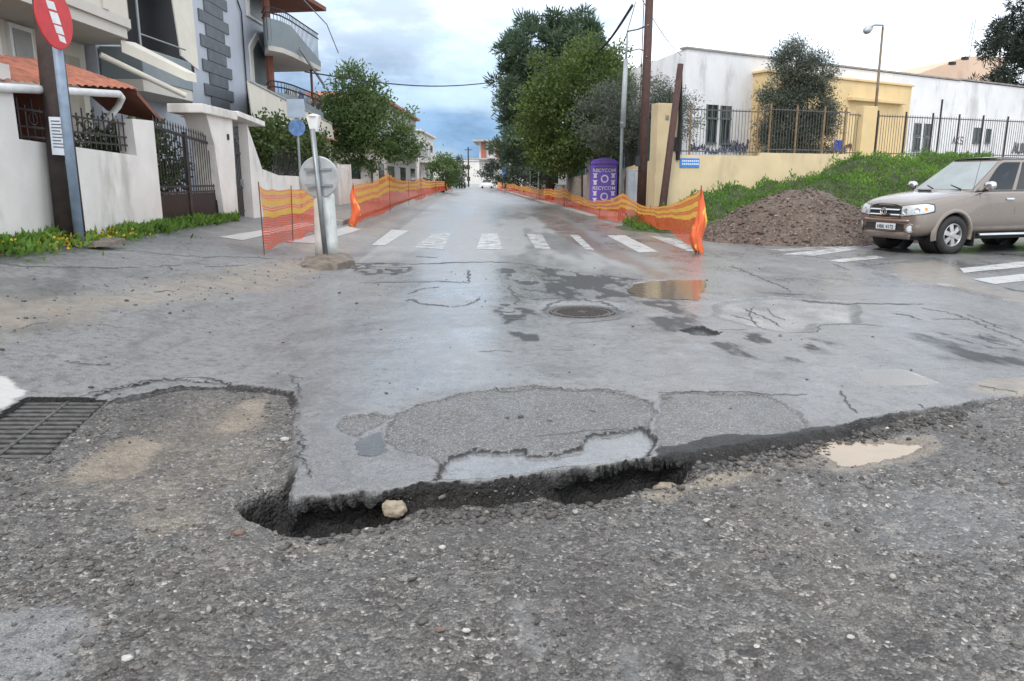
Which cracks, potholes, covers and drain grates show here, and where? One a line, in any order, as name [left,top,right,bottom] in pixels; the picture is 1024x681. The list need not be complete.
pothole [234,481,383,539]
pothole [536,458,689,506]
manhole cover [549,306,615,318]
crack [355,256,580,307]
drain grate [0,401,109,461]
crack [839,390,924,413]
crack [720,265,1024,346]
